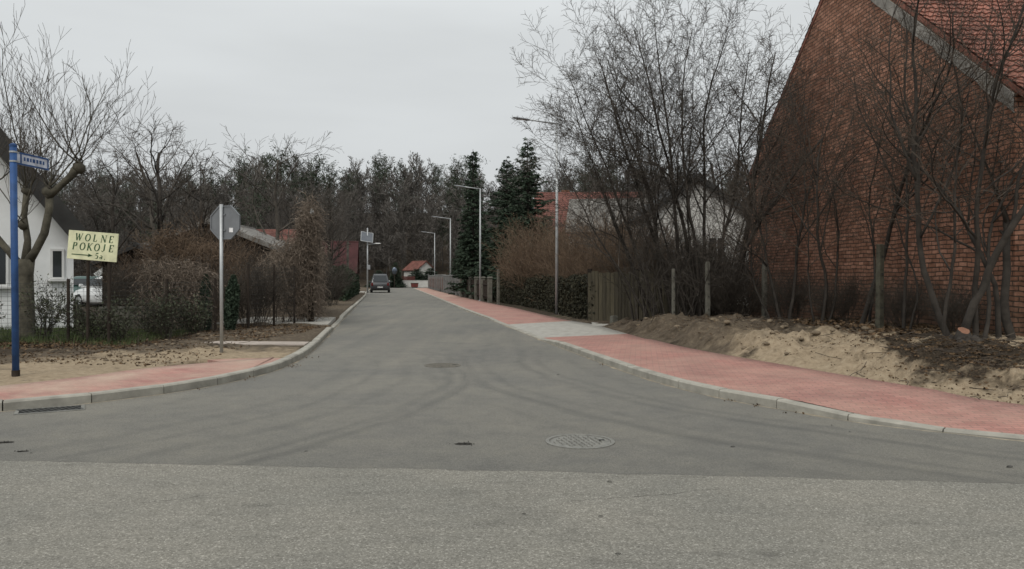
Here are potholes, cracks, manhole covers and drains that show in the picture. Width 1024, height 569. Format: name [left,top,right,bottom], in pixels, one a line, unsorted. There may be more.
drain grate [13,404,85,415]
manhole cover [546,434,615,449]
